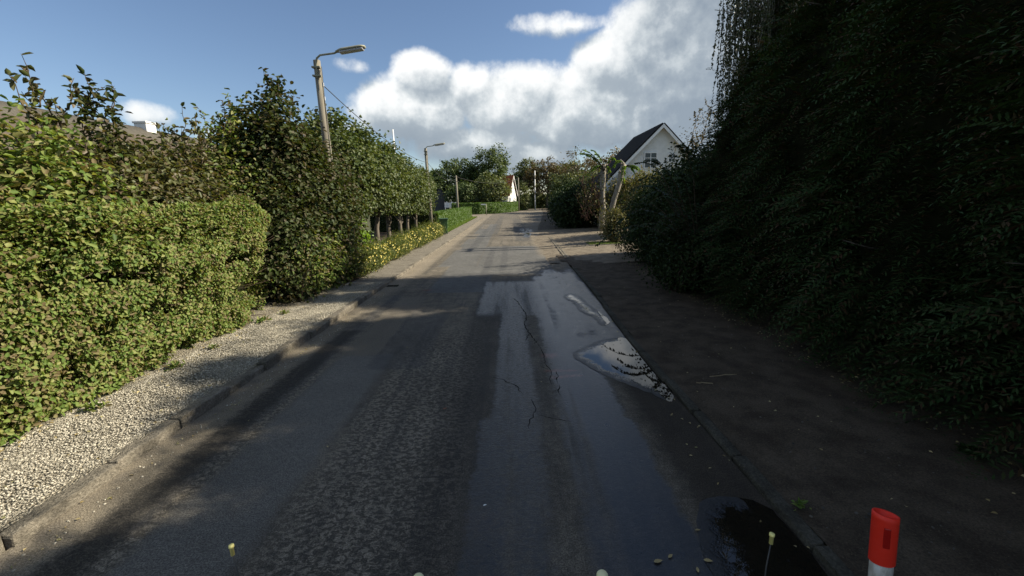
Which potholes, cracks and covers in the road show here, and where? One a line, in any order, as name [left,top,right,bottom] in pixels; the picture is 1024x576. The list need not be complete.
crack [515,300,560,393]
